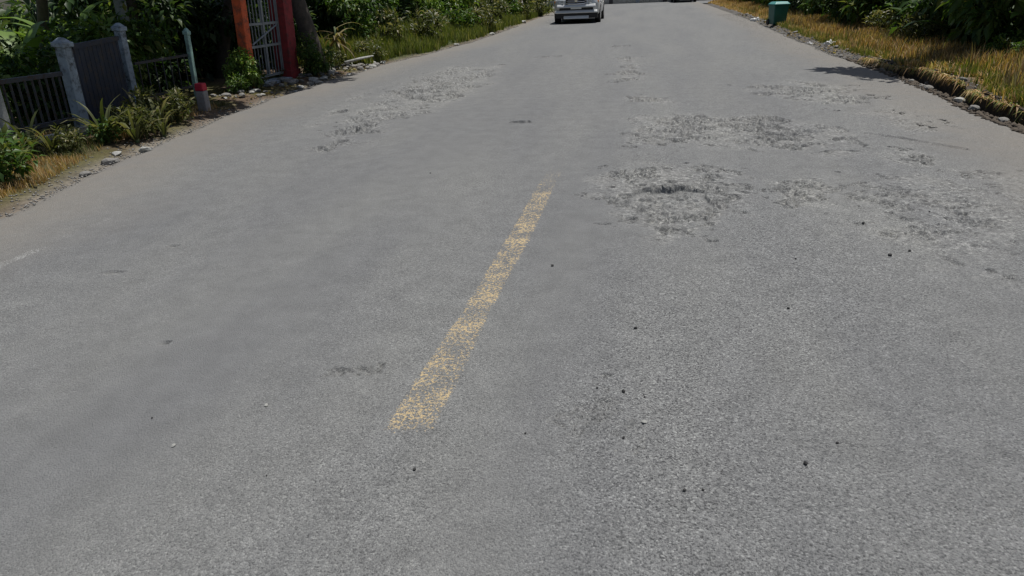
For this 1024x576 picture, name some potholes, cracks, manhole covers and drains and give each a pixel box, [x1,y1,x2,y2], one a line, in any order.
pothole [626,186,714,218]
